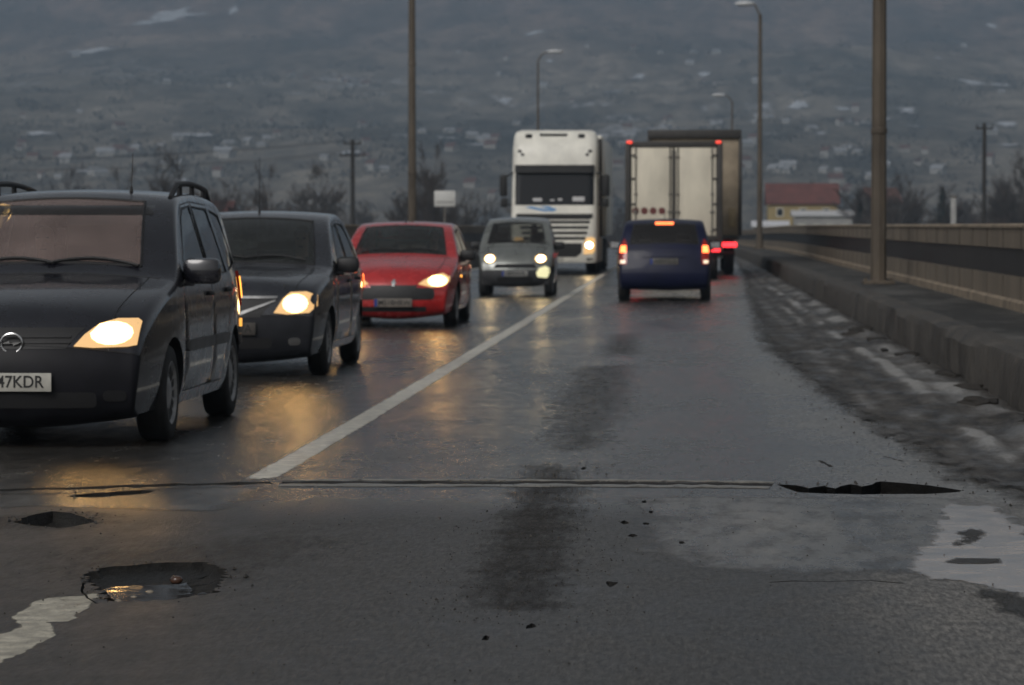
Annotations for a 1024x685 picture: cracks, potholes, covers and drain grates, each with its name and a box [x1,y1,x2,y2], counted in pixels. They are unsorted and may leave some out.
pothole [778,481,962,495]
pothole [83,562,230,601]
pothole [14,511,94,528]
